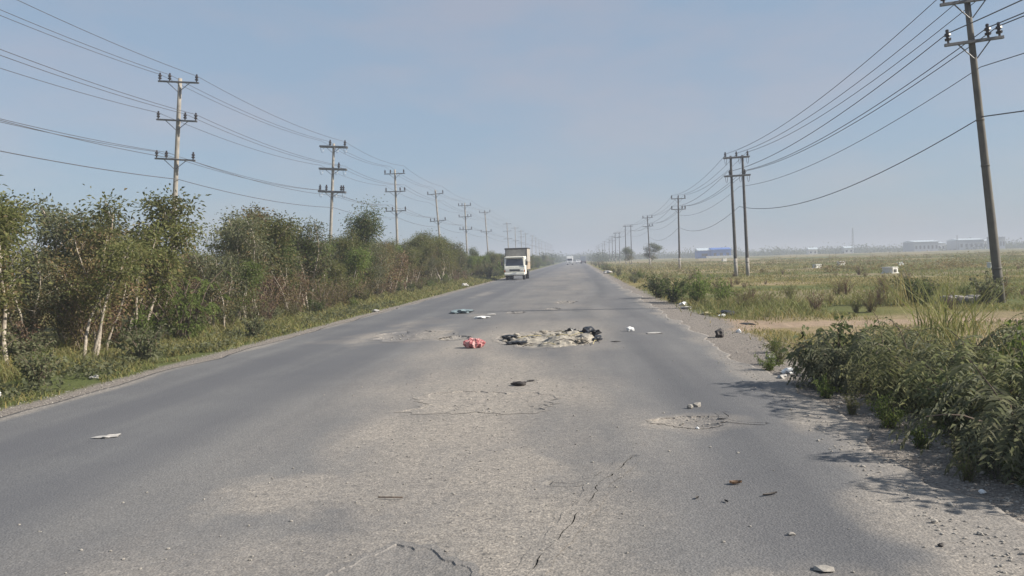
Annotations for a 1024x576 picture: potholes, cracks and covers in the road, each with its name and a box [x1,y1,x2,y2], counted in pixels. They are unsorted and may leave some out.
pothole [491,331,585,349]
crack [507,456,643,576]
